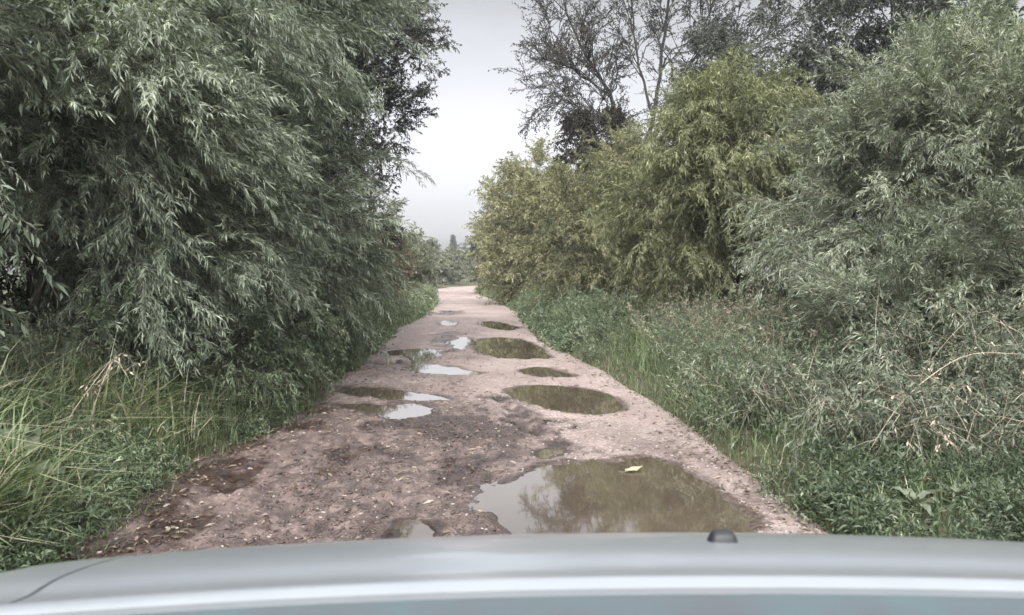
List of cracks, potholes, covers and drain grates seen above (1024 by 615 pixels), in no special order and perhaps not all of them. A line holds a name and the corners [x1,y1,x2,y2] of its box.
pothole [500,384,631,415]
pothole [330,403,438,420]
pothole [446,336,476,350]
pothole [468,337,555,359]
pothole [335,386,460,402]
pothole [476,321,522,331]
pothole [394,364,489,376]
pothole [383,348,445,364]
pothole [467,453,771,535]
pothole [516,367,581,378]
